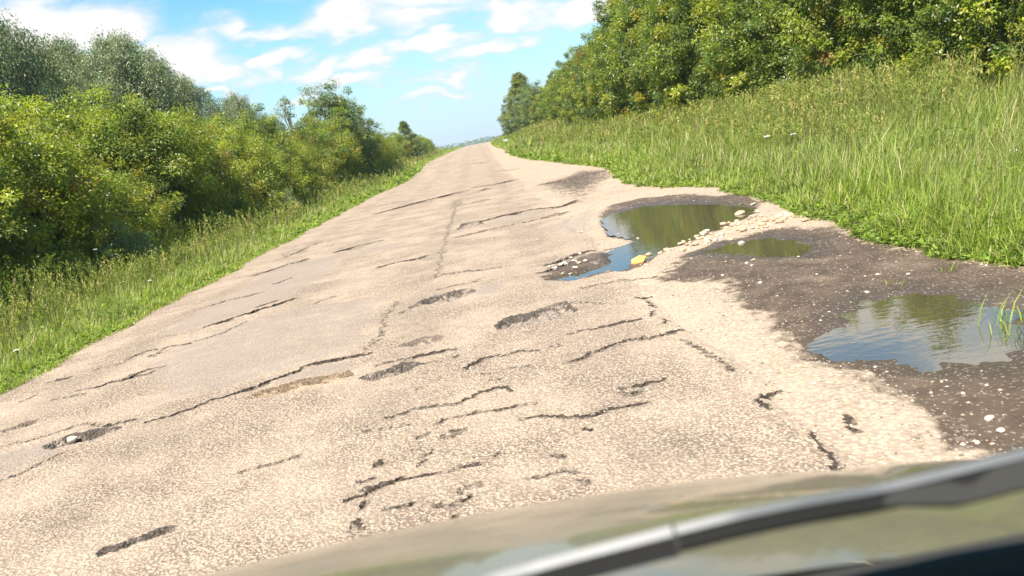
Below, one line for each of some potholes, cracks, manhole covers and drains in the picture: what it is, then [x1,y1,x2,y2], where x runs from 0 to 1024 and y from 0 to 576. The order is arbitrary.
pothole [408,288,476,309]
pothole [494,300,578,330]
pothole [681,235,828,258]
pothole [795,288,1024,375]
crack [807,414,864,471]
pothole [358,361,421,382]
pothole [542,201,758,281]
crack [0,162,784,535]
pothole [41,426,123,450]
